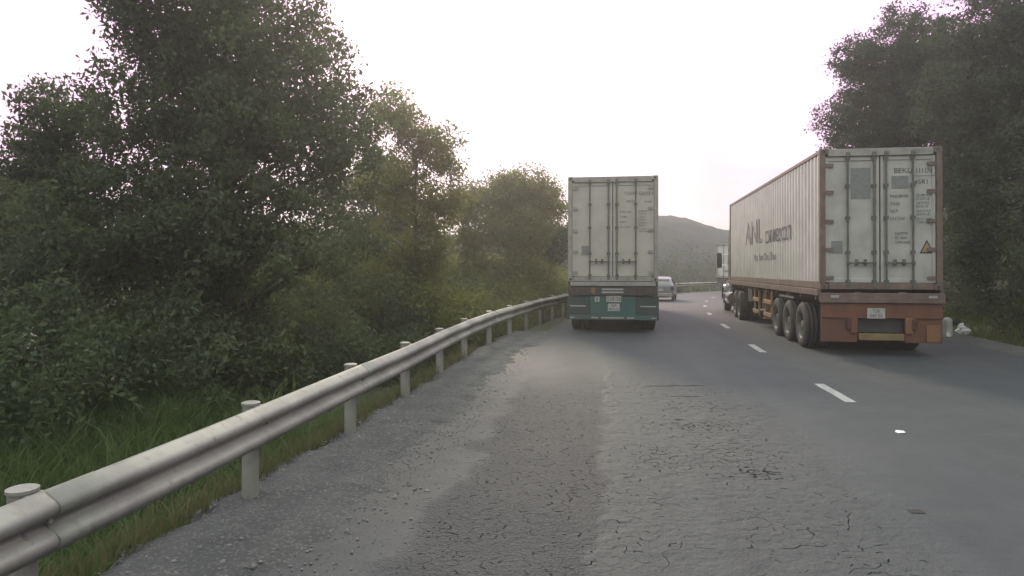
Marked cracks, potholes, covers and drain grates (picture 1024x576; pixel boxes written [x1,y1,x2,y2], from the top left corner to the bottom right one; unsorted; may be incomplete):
crack [396,381,961,576]
